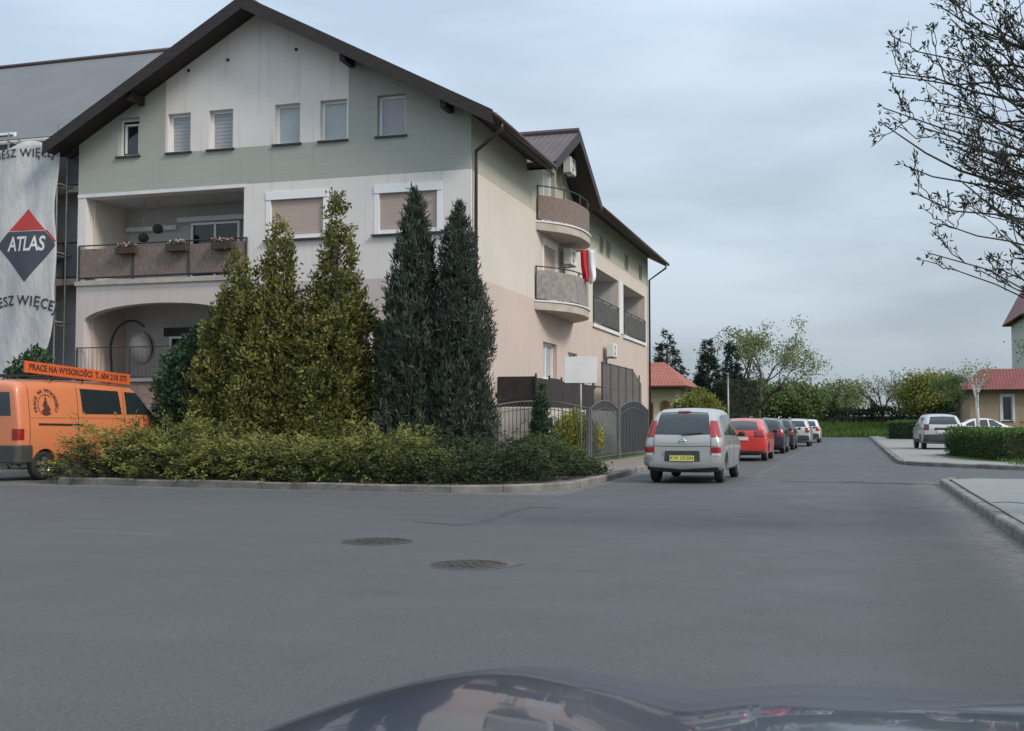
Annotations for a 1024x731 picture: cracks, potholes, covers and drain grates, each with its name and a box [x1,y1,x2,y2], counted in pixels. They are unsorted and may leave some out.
crack [411,506,557,525]
manhole cover [429,559,525,570]
